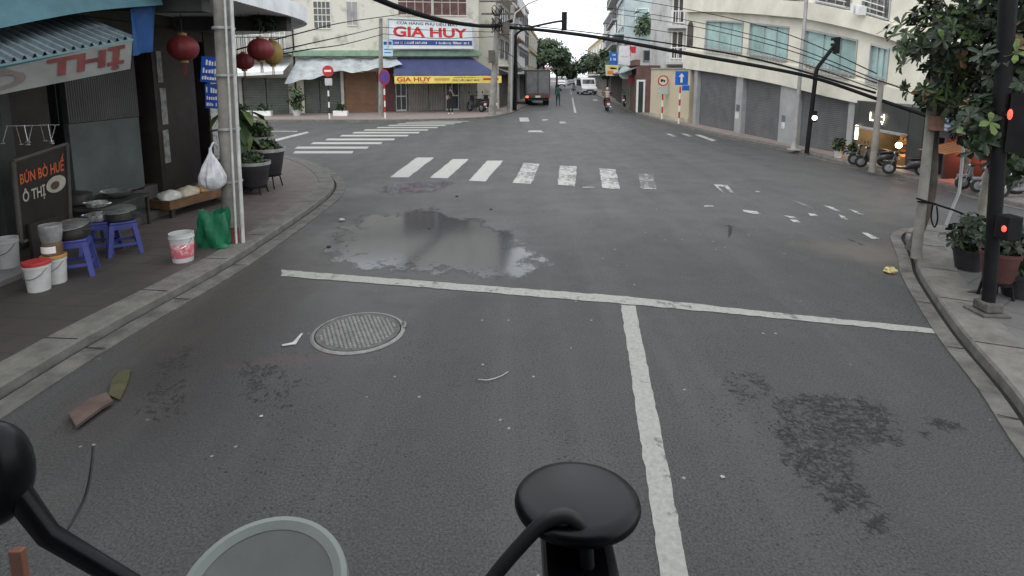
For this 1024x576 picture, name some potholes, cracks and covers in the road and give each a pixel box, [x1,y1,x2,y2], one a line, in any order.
manhole cover [310,312,406,355]
